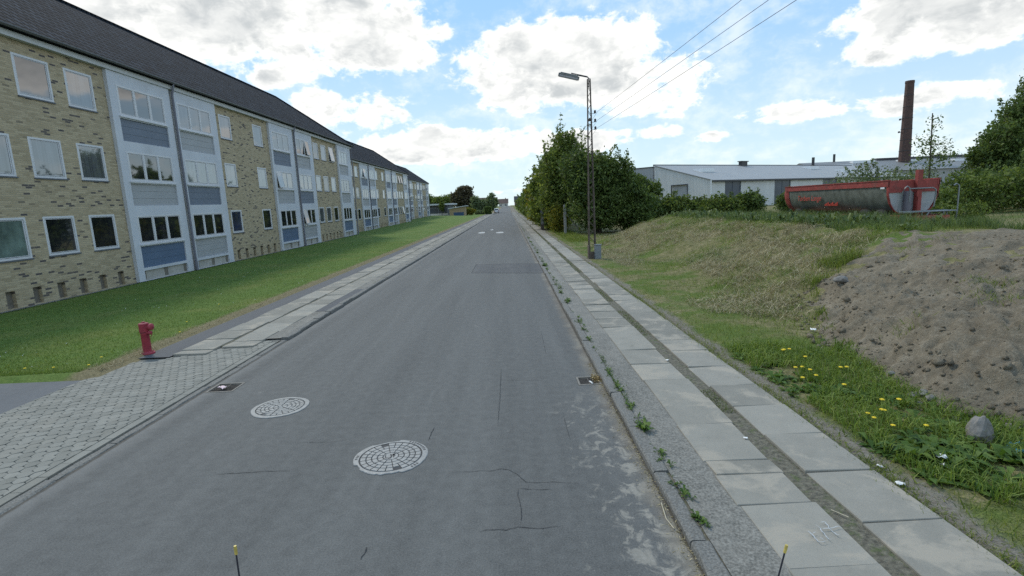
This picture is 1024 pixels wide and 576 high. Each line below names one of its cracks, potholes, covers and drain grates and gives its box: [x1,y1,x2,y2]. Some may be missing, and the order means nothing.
crack [471,468,566,532]
drain grate [205,382,246,393]
drain grate [576,376,601,385]
manhole cover [353,440,428,475]
manhole cover [250,397,310,418]
